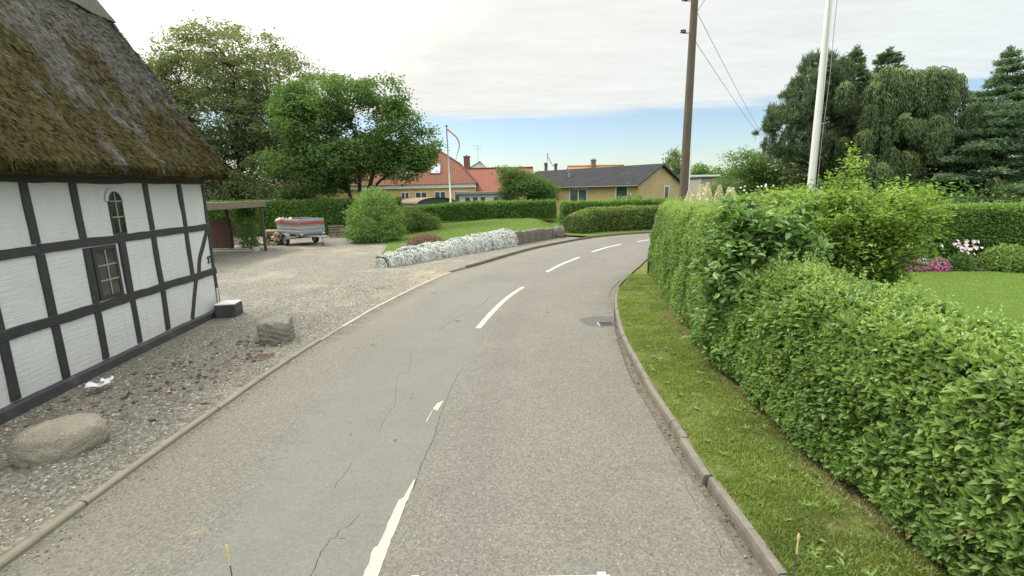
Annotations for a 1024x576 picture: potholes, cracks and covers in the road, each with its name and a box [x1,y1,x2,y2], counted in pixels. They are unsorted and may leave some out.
crack [310,514,360,576]
crack [405,367,464,506]
